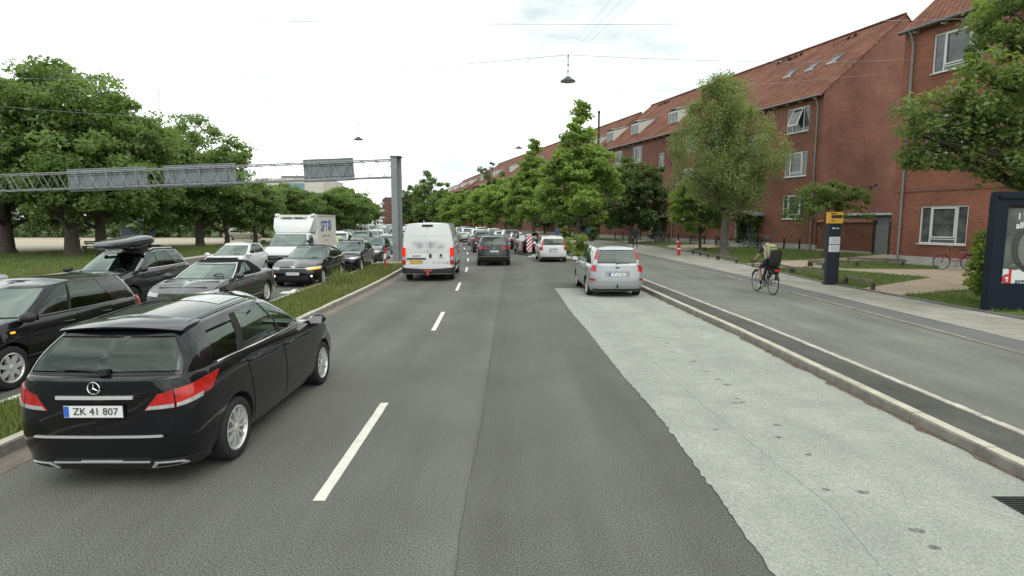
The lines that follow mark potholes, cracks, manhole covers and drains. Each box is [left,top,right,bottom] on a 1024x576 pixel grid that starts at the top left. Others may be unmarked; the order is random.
drain grate [991,496,1024,515]
